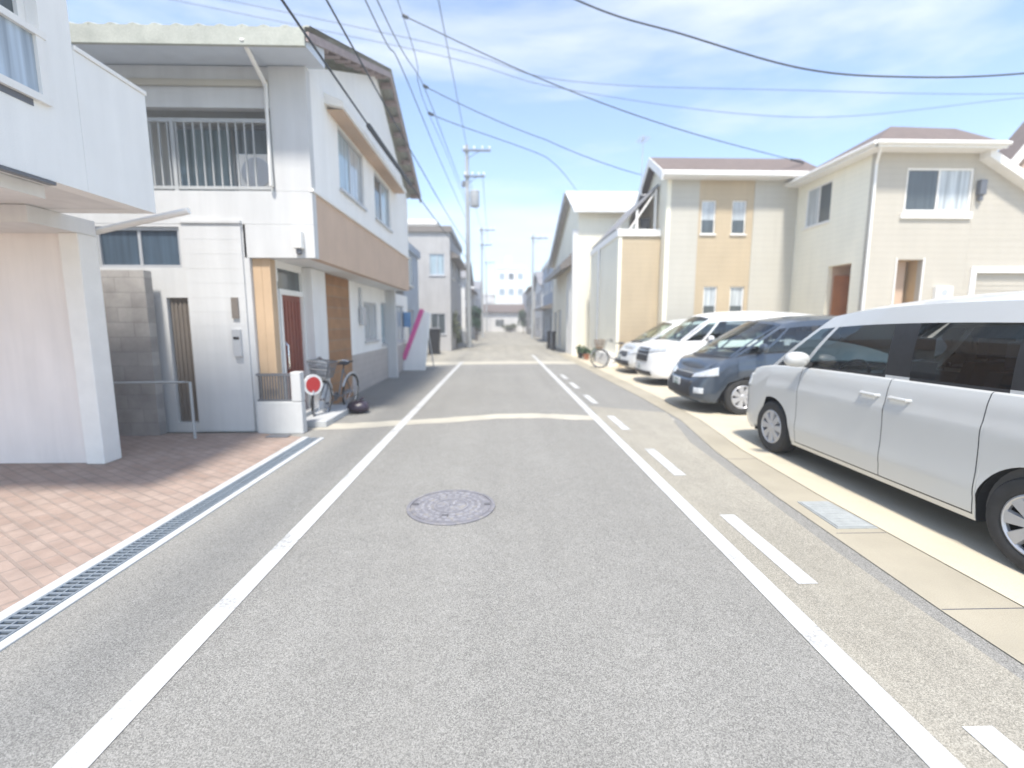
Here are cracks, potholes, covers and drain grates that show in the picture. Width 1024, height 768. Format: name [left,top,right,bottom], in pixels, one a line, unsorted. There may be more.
manhole cover [406,490,495,526]
